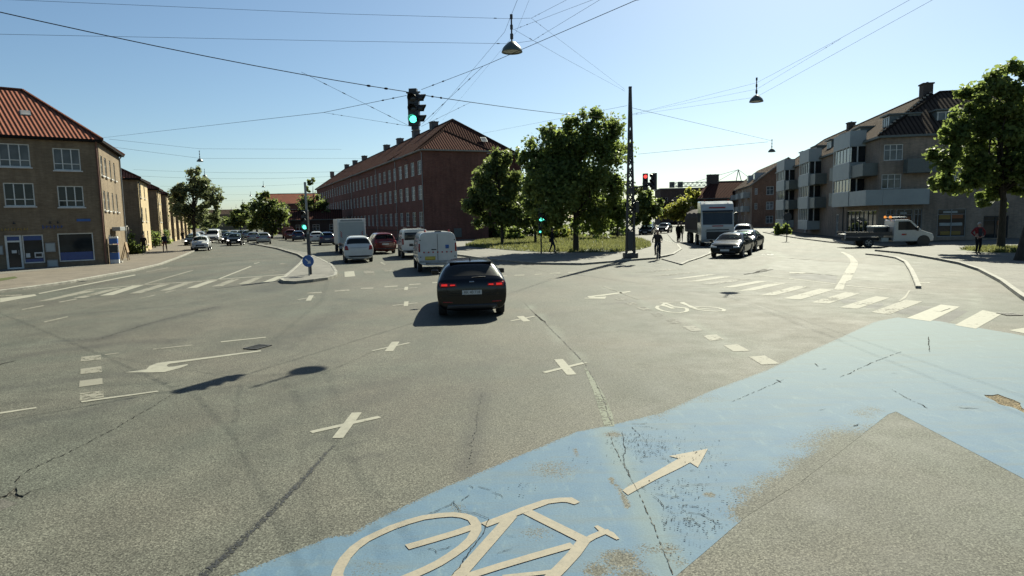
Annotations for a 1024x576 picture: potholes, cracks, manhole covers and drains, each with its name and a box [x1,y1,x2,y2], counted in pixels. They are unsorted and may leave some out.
pothole [985,394,1024,412]
crack [0,388,186,497]
crack [508,476,737,559]
